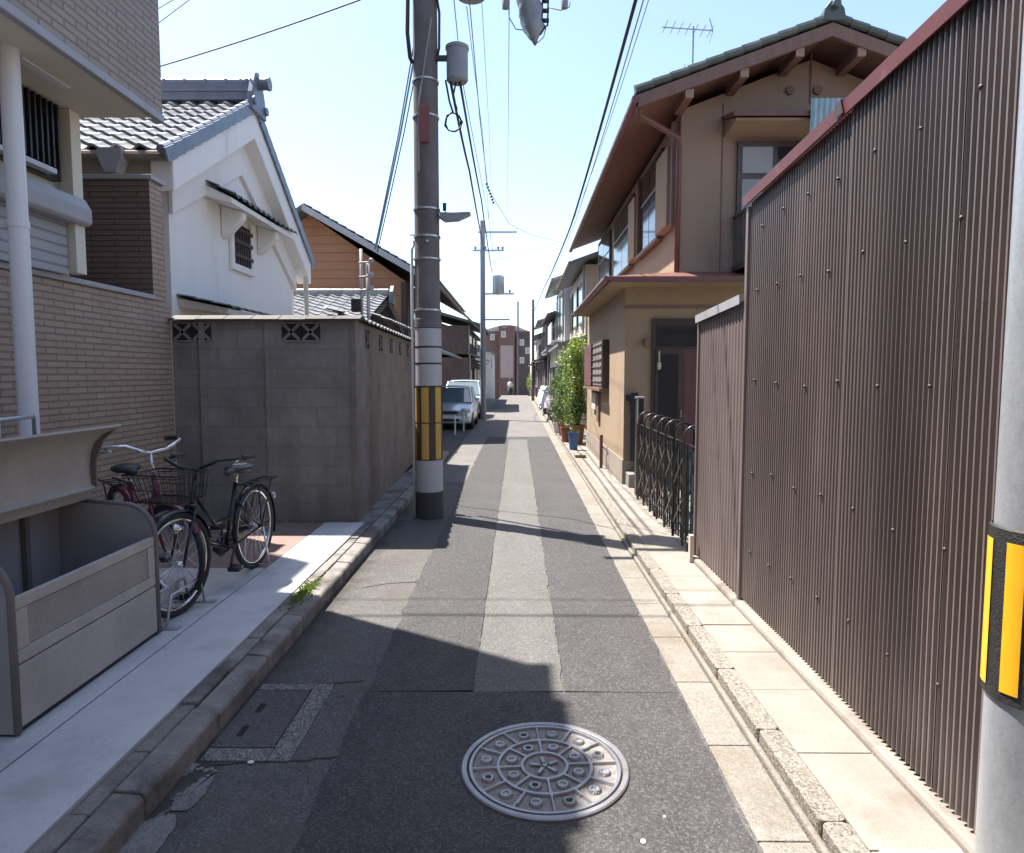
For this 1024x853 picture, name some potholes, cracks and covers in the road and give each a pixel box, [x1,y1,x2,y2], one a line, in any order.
manhole cover [461,722,629,823]
crack [215,756,337,765]
manhole cover [200,684,335,762]
